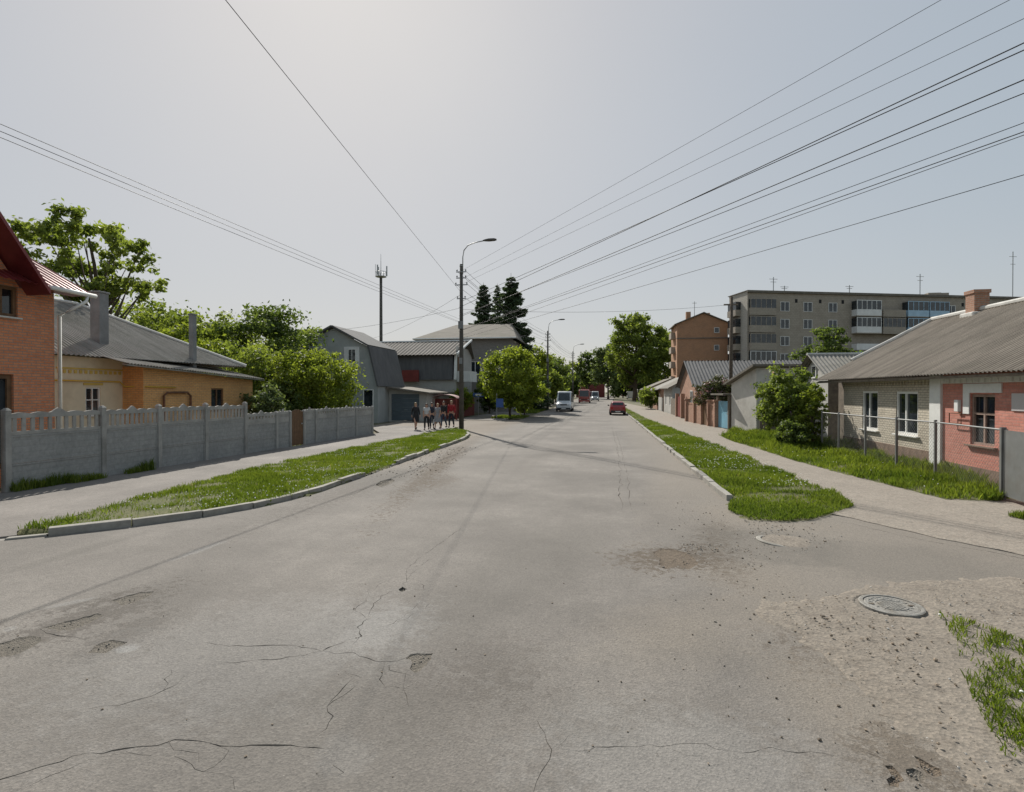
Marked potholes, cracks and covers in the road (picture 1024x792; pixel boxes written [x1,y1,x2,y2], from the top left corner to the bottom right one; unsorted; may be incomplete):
pothole [885,765,904,788]
manhole cover [858,594,926,618]
crack [533,721,580,792]
pothole [44,613,104,631]
pothole [406,653,433,673]
pothole [112,591,155,606]
pothole [914,756,942,777]
crack [206,528,461,706]
pothole [88,640,127,653]
crack [612,428,631,510]
pothole [906,768,925,783]
crack [0,676,353,792]
